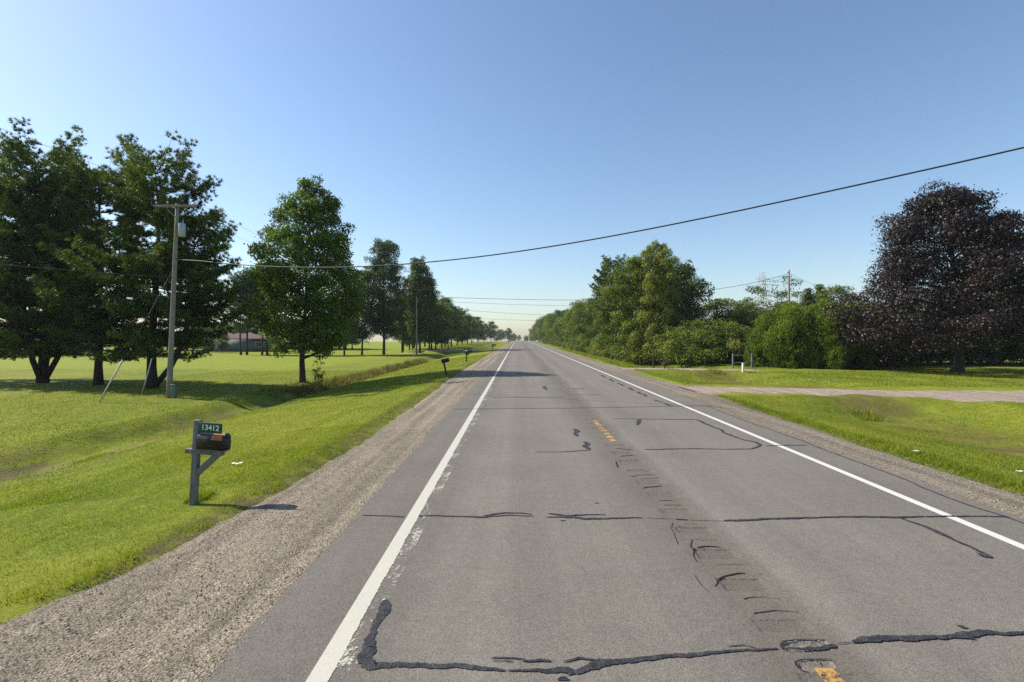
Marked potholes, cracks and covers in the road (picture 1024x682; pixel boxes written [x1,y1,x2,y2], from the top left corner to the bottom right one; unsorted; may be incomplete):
crack [671,523,796,614]
